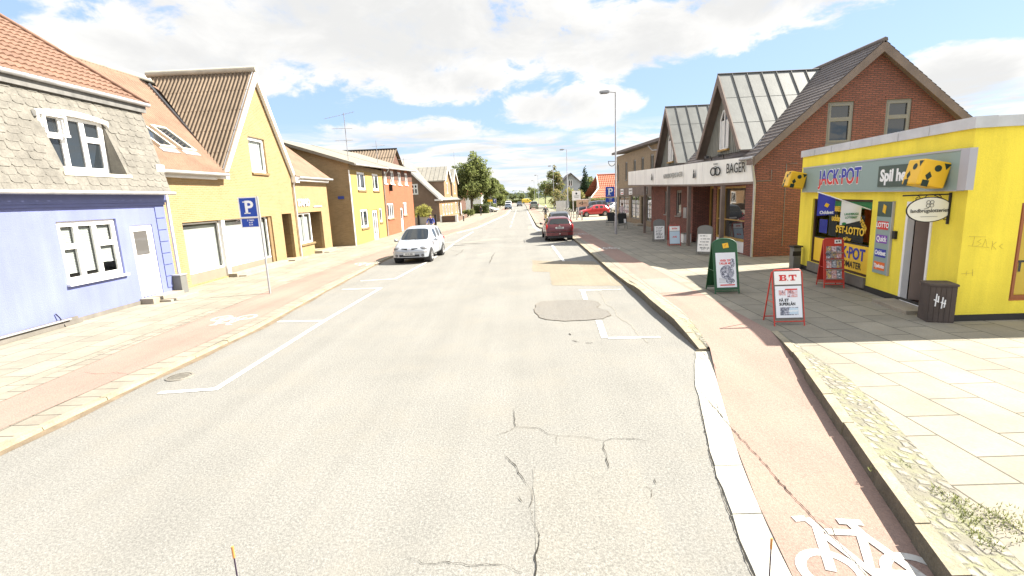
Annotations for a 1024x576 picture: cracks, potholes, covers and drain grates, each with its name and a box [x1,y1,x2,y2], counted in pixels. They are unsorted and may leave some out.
manhole cover [165,372,194,382]
crack [504,417,644,466]
crack [412,456,540,576]
